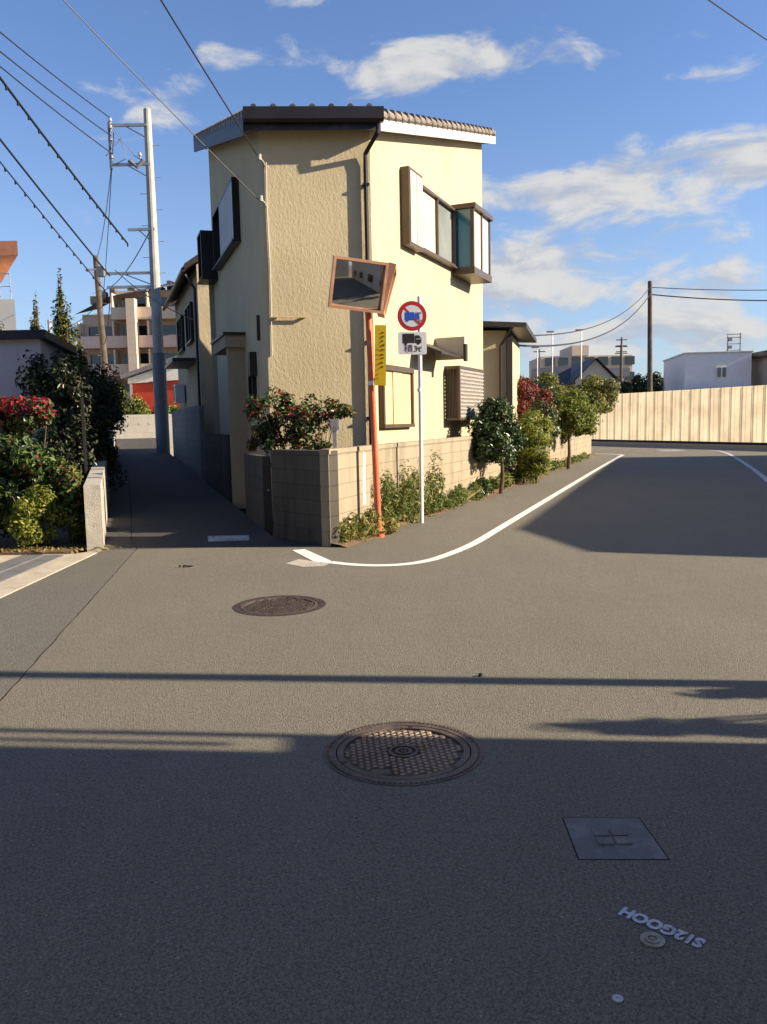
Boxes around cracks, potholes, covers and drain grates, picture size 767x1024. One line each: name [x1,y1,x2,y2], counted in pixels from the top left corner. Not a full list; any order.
manhole cover [233,595,326,616]
manhole cover [323,721,484,786]
manhole cover [562,817,670,860]
